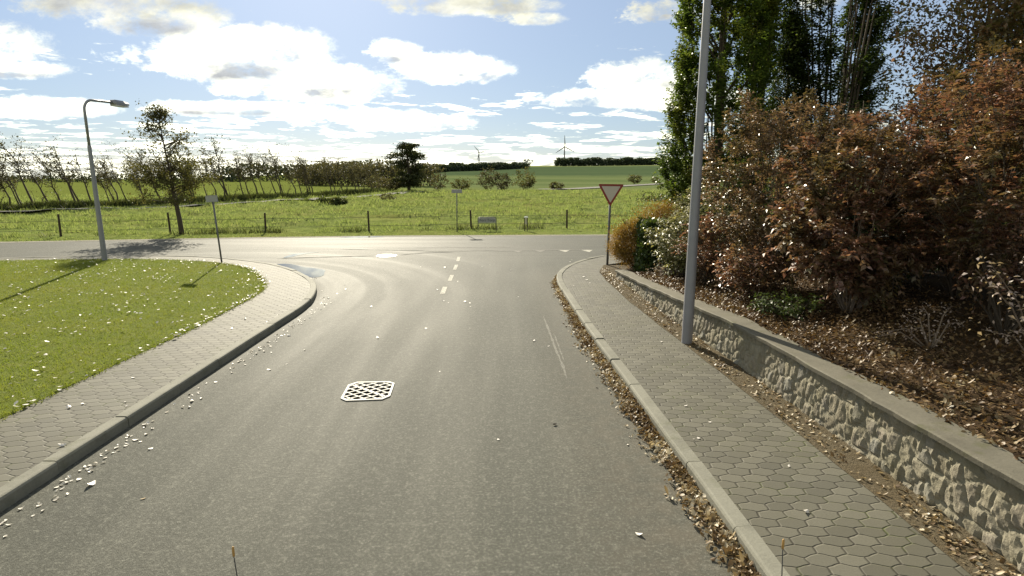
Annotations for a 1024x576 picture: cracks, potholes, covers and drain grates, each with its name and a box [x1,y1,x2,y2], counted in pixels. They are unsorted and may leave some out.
drain grate [340,381,395,401]
